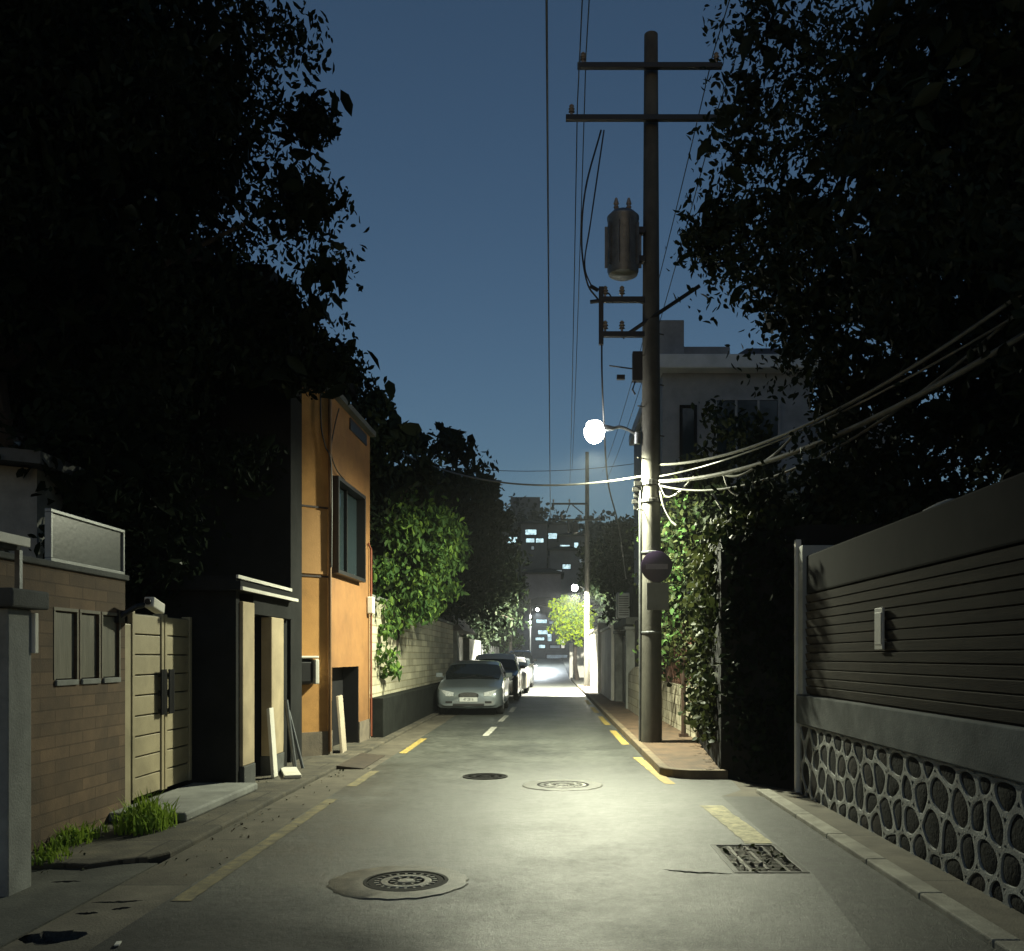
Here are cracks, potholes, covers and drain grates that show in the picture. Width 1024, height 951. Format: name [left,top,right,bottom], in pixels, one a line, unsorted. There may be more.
manhole cover [522,779,603,791]
pothole [23,930,88,945]
manhole cover [326,865,469,901]
drain grate [710,843,810,873]
